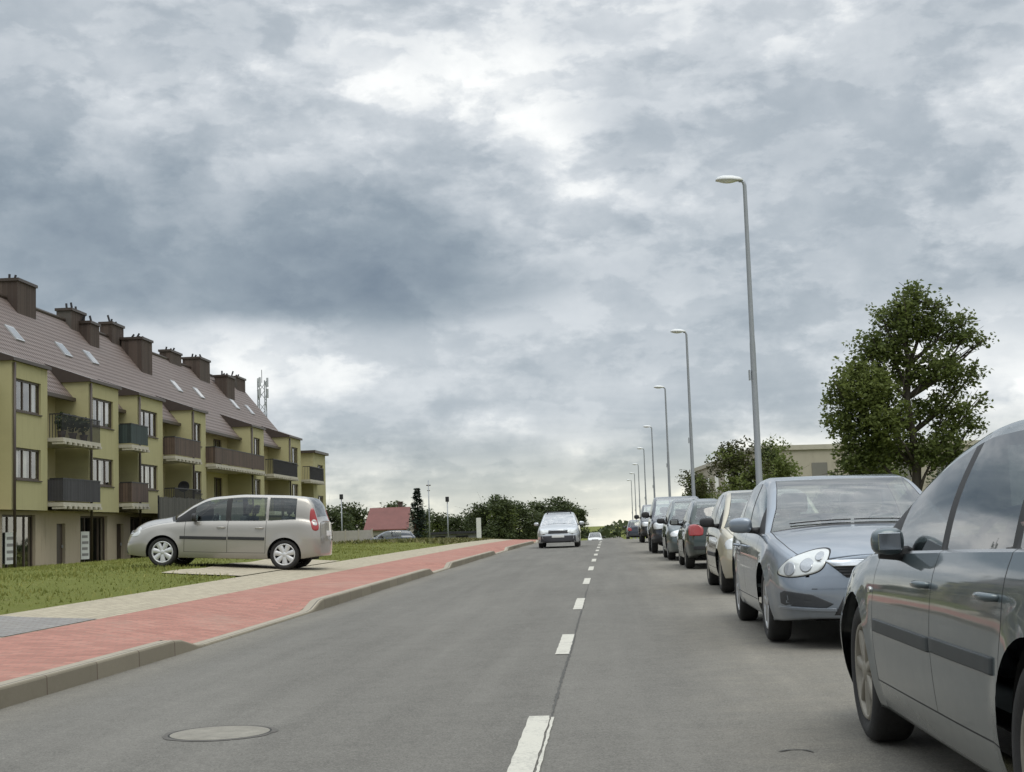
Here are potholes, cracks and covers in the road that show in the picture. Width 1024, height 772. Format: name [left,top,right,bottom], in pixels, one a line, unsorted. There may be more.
manhole cover [162,725,279,741]
